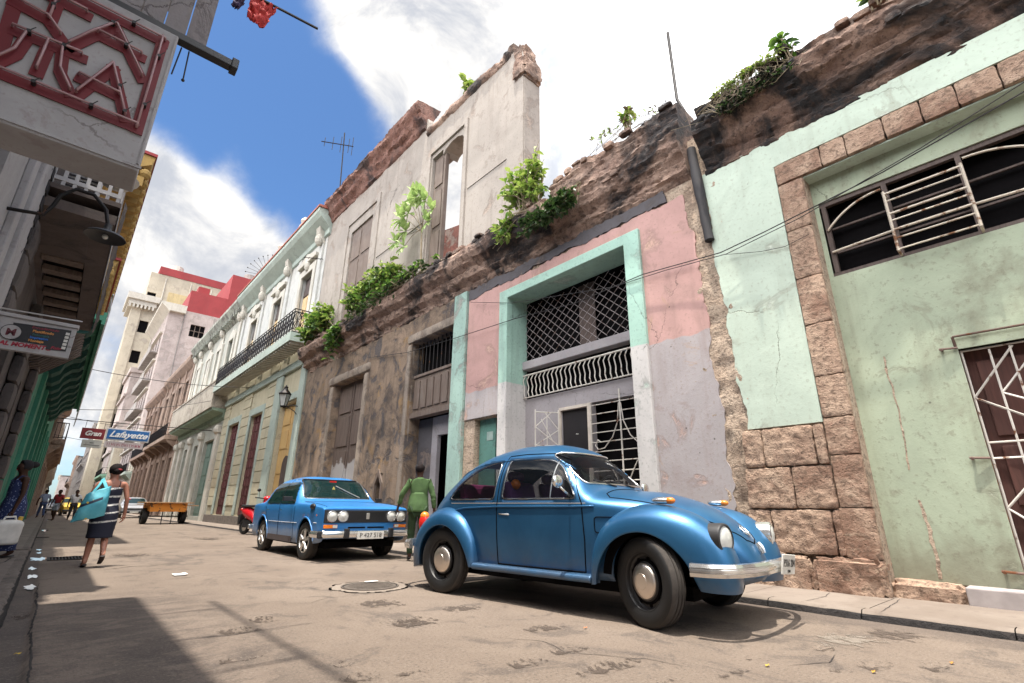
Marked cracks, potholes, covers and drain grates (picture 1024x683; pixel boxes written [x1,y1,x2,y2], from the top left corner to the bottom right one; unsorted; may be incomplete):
manhole cover [341,582,399,591]
